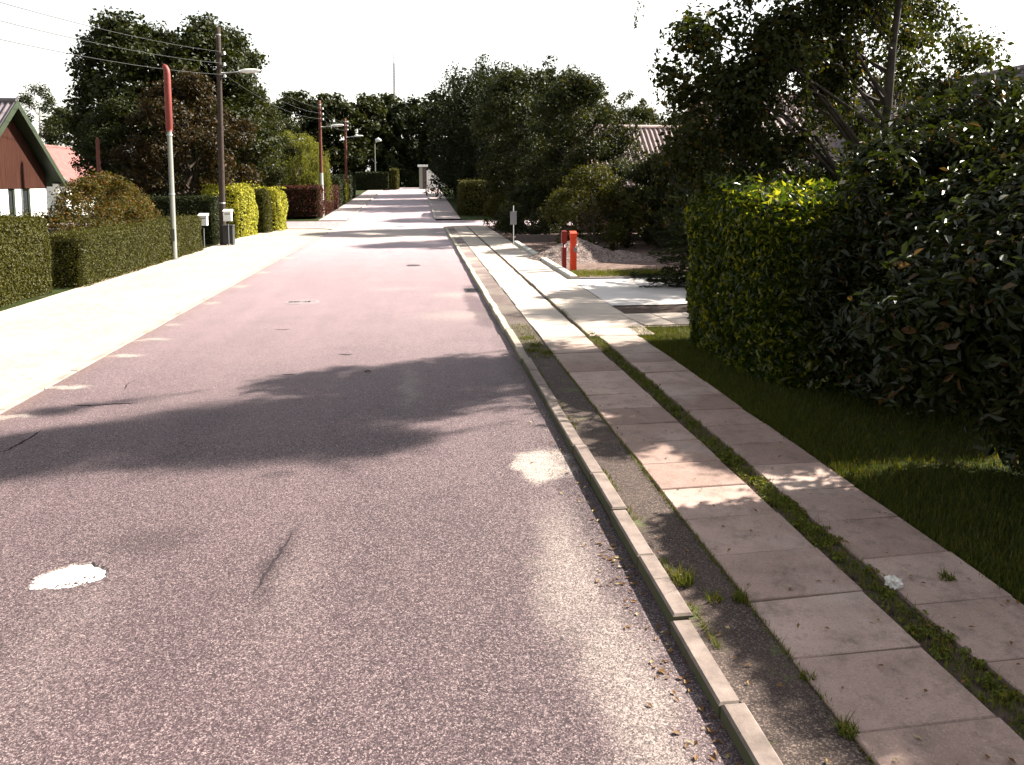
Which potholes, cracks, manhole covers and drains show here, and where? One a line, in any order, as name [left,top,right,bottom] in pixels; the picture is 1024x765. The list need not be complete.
crack [250,533,292,599]
